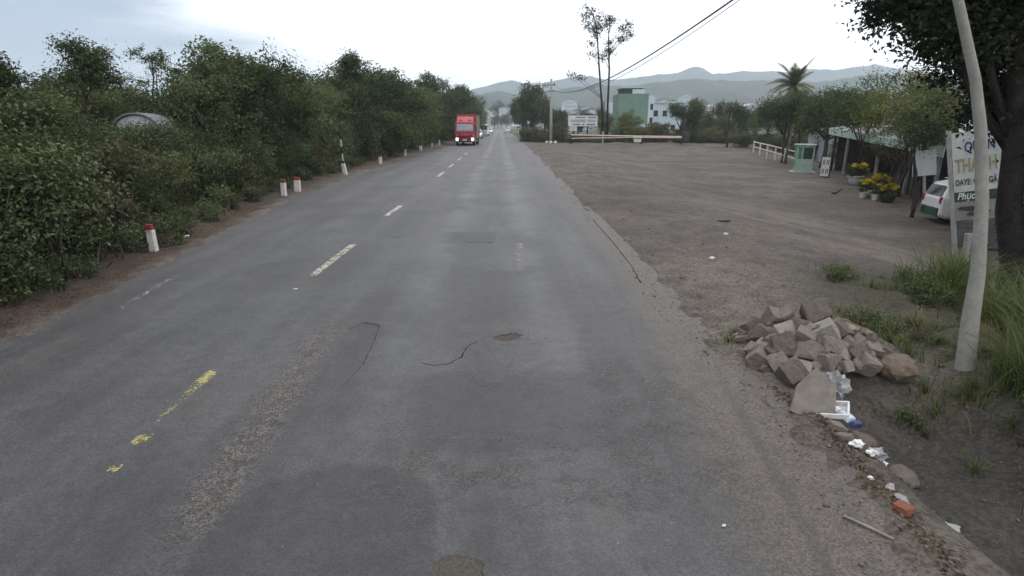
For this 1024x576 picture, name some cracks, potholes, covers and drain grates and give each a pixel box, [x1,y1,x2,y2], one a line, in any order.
pothole [493,333,521,341]
pothole [428,555,485,576]
